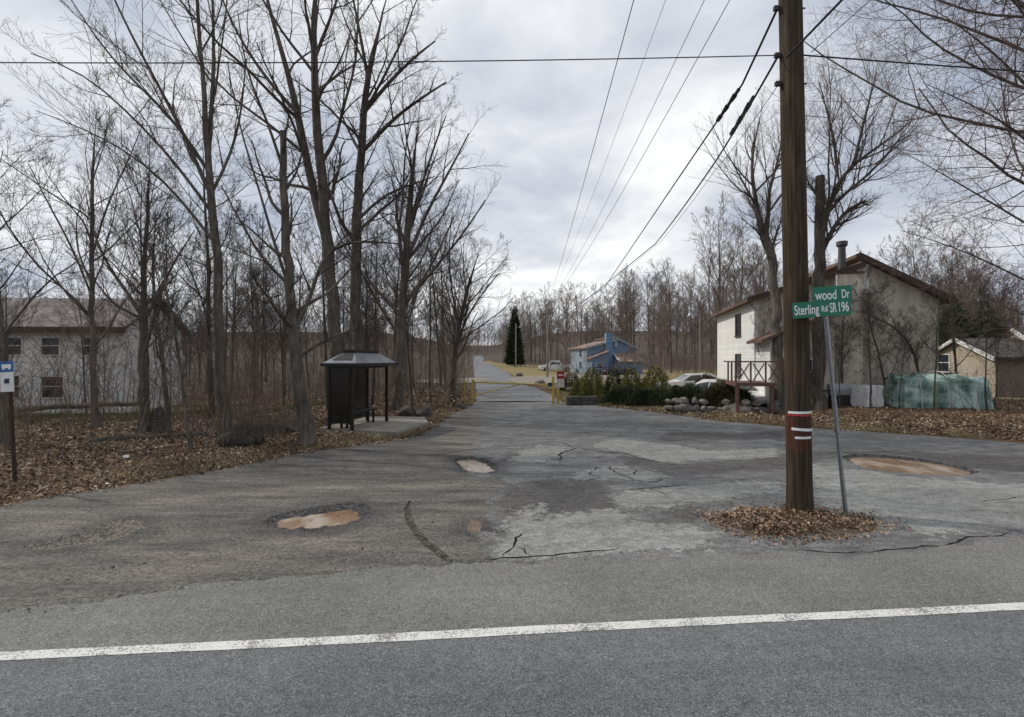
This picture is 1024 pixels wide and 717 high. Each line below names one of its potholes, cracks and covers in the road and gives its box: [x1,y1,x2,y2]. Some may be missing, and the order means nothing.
crack [540,442,687,494]
pothole [452,457,499,473]
pothole [467,520,481,533]
crack [794,533,1012,553]
pothole [263,502,379,532]
pothole [842,454,979,476]
